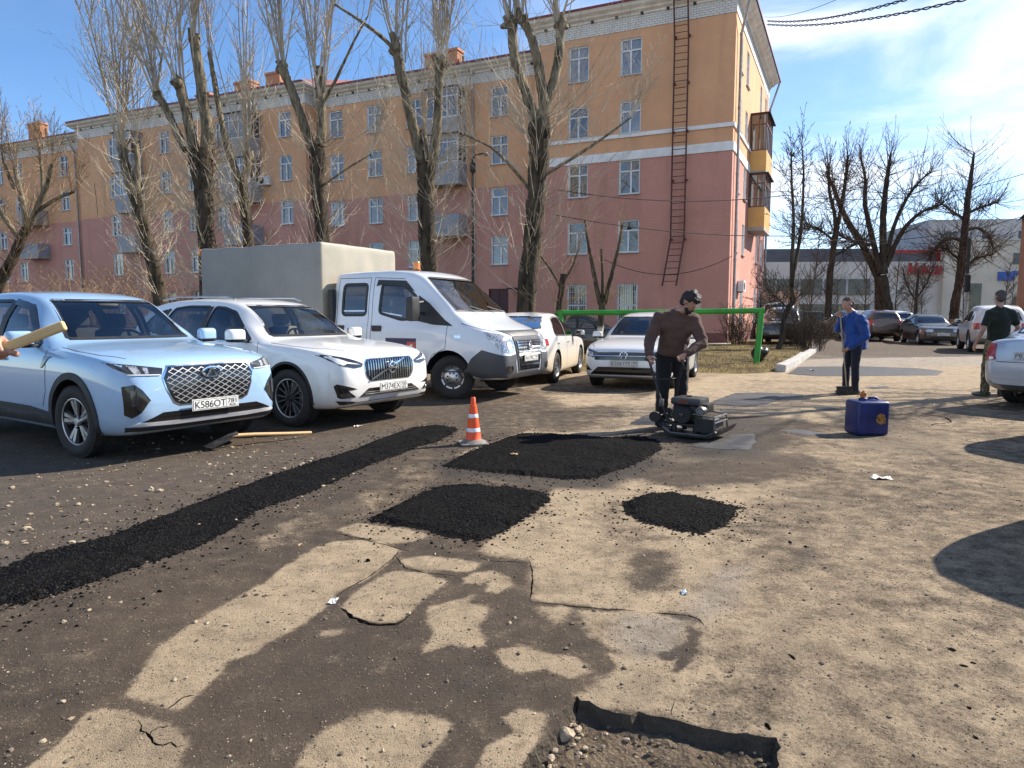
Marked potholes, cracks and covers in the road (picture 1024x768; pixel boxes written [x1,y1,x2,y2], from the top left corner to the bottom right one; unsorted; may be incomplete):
pothole [522,696,781,768]
crack [138,695,193,748]
crack [335,533,634,626]
